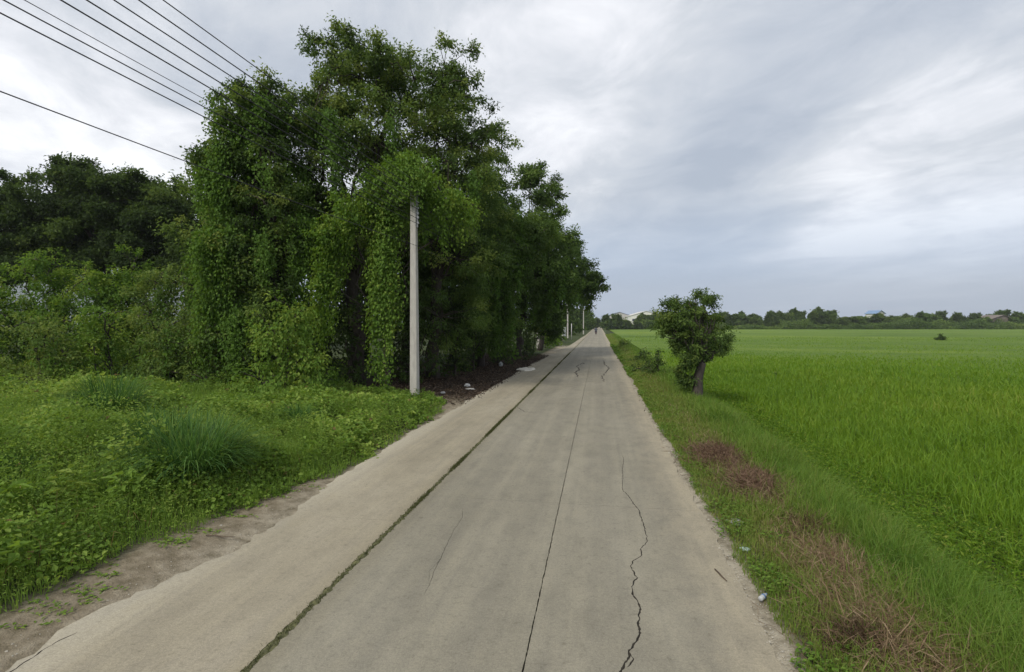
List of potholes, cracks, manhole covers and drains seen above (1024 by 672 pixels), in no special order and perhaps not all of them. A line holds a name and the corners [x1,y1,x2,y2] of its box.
crack [619,454,648,672]
